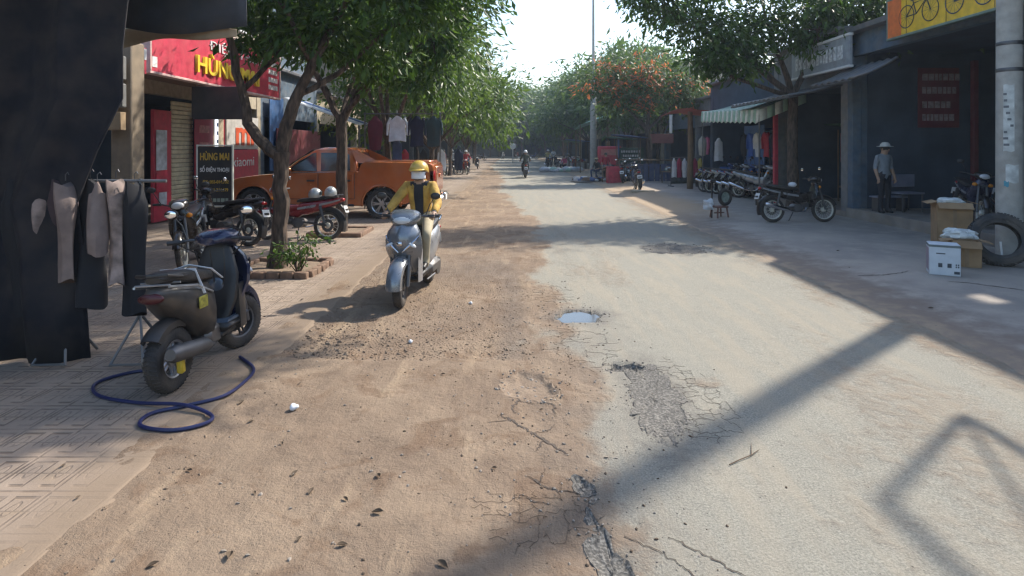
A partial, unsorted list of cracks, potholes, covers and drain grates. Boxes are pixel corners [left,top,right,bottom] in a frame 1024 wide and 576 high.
pothole [540,307,611,325]
crack [471,472,604,554]
pothole [602,359,646,373]
pothole [624,364,692,447]
pothole [639,243,712,254]
crack [624,536,746,576]
crack [489,398,569,455]
crack [556,327,614,368]
